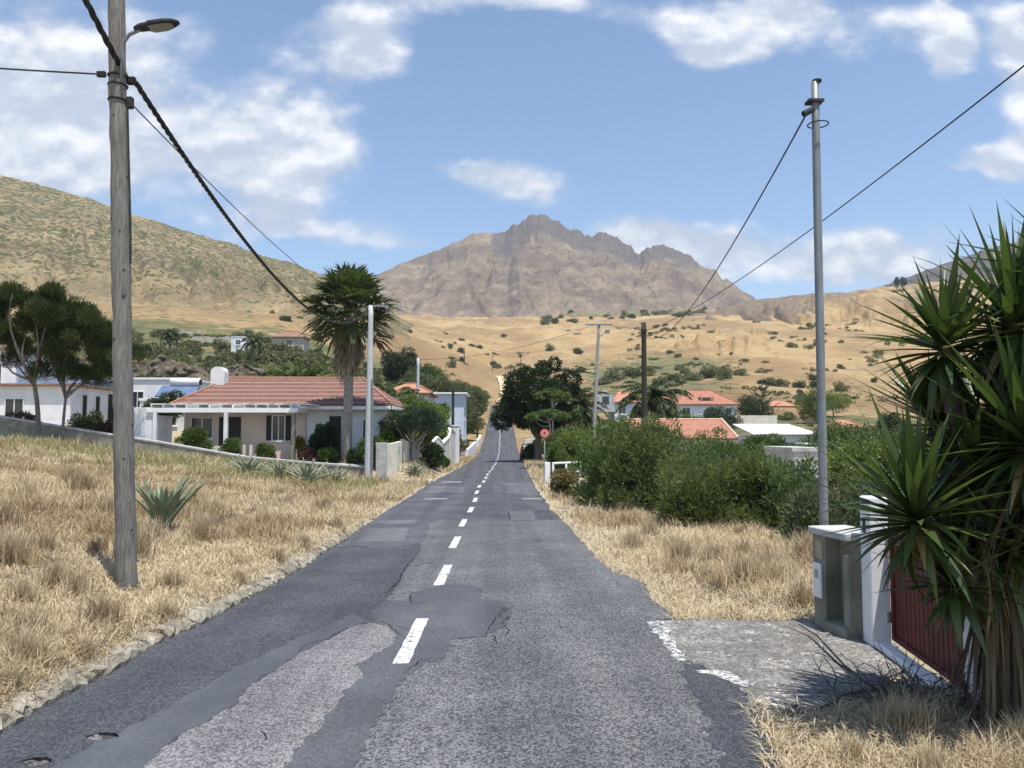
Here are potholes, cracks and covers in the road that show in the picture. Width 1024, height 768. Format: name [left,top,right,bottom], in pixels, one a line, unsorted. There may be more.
pothole [21,757,52,766]
